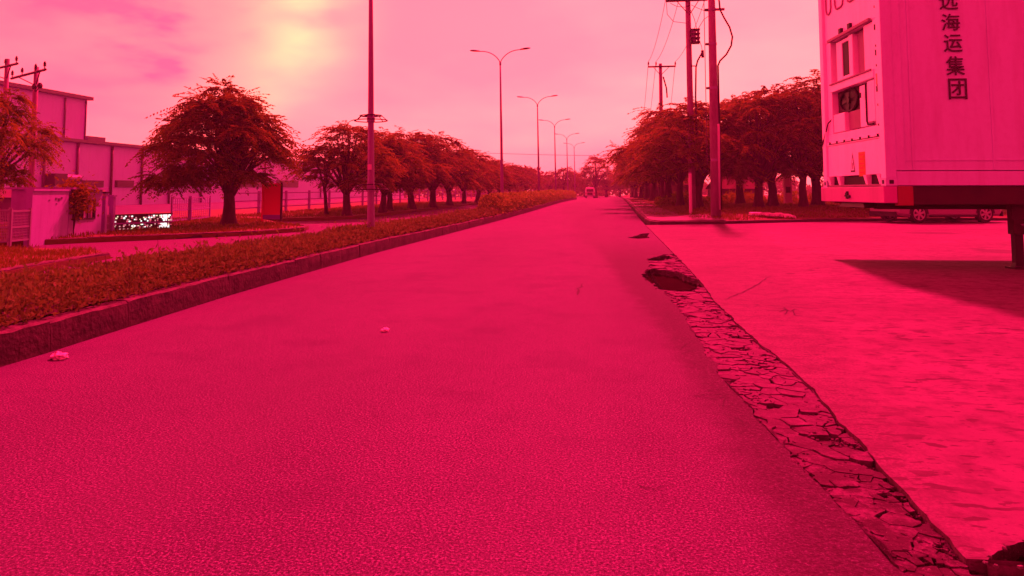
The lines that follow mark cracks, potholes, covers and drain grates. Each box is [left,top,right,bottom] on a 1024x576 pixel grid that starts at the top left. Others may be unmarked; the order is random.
crack [650,257,983,576]
pothole [641,269,702,291]
